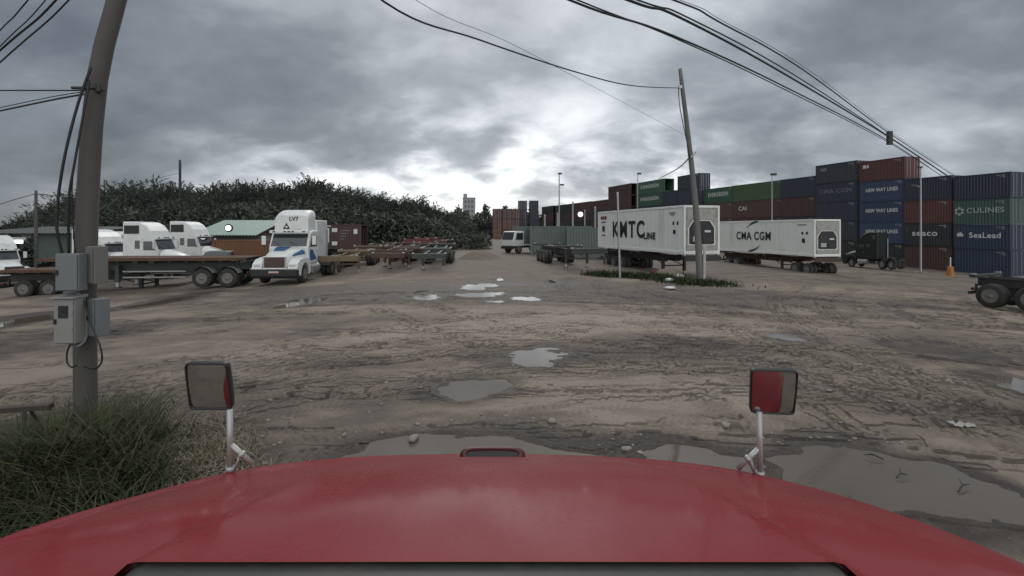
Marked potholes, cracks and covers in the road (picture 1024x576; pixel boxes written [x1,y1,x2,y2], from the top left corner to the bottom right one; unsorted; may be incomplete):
pothole [326,427,614,459]
pothole [502,345,575,368]
pothole [748,440,1024,530]
pothole [397,292,448,301]
pothole [430,375,521,404]
pothole [758,331,818,343]
pothole [259,295,341,310]
pothole [625,438,784,480]
pothole [454,282,506,291]
